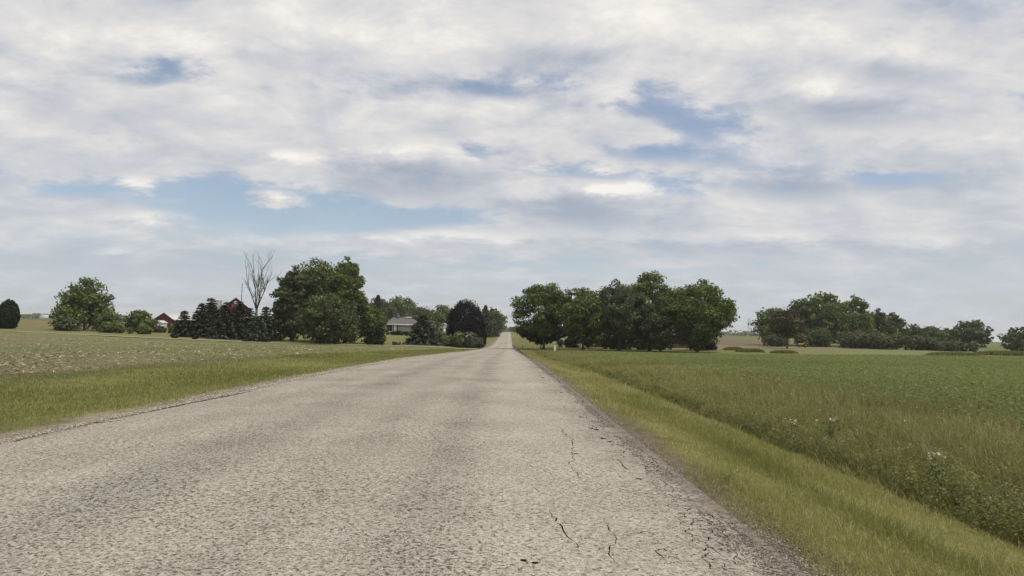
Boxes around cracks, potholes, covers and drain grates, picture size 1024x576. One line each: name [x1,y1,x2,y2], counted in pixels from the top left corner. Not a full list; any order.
crack [583,412,740,570]
